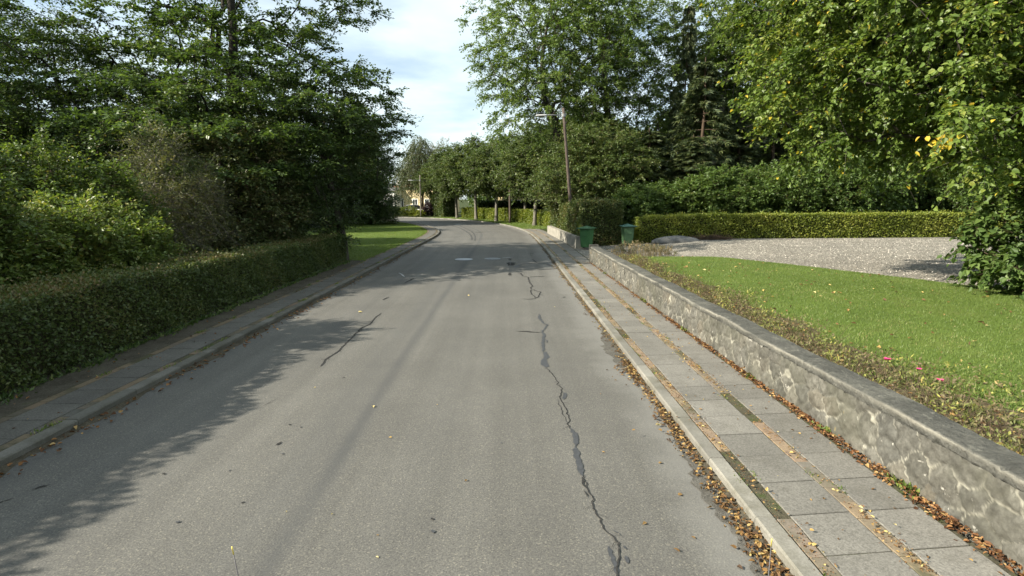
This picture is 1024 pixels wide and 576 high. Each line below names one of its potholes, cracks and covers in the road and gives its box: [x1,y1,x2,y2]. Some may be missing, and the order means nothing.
crack [321,297,388,366]
crack [515,253,551,299]
crack [546,368,571,428]
crack [582,474,620,576]
